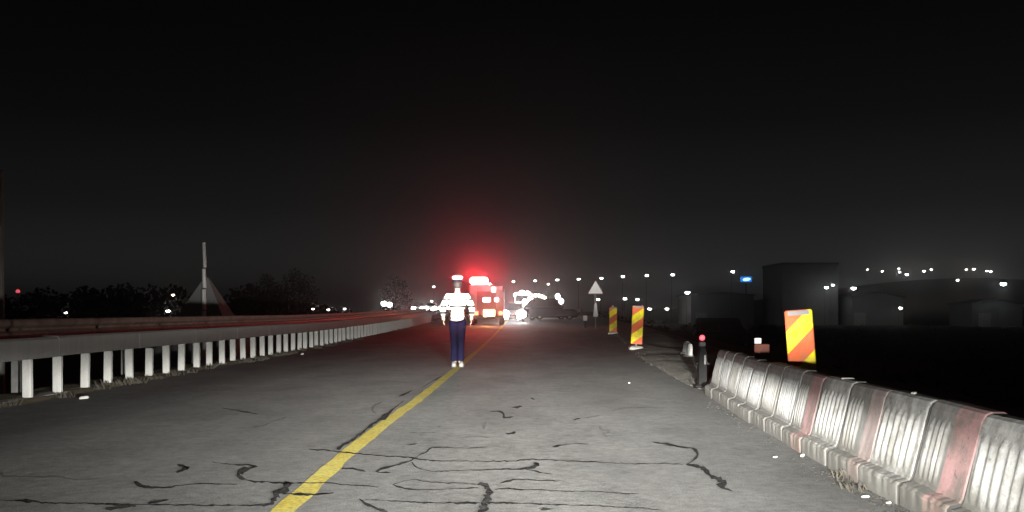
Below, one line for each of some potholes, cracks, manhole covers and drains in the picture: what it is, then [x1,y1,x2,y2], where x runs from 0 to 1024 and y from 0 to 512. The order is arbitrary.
crack [5,376,732,512]
